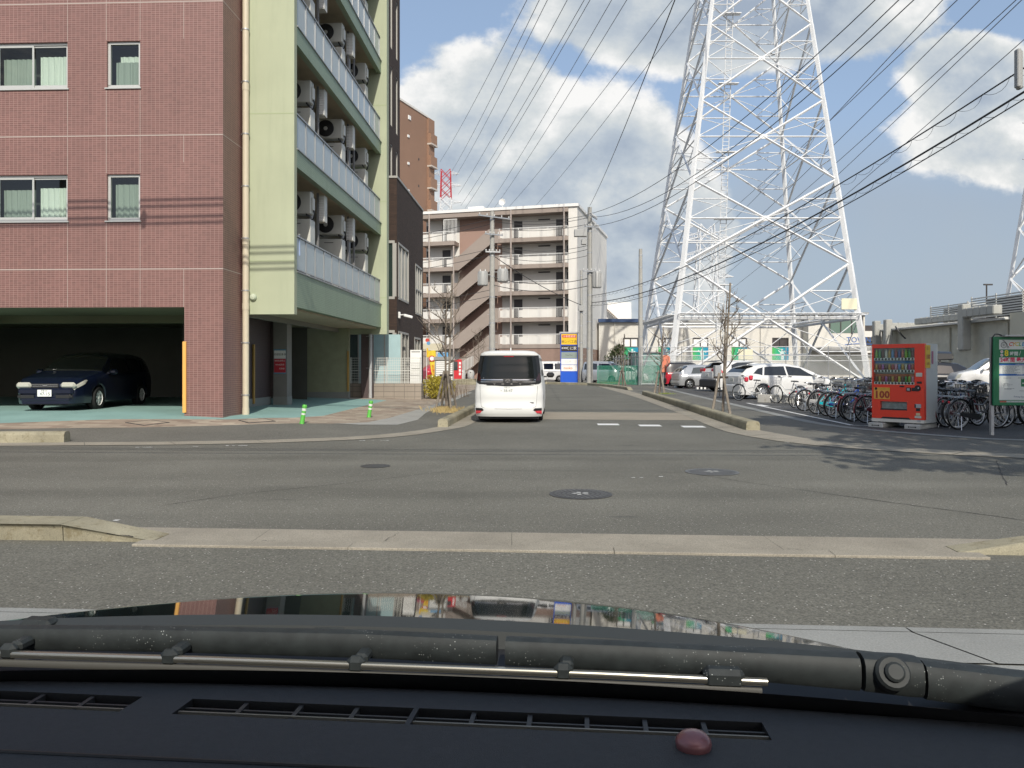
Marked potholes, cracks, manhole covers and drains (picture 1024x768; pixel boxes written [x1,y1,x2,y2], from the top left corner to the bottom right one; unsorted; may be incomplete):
manhole cover [549,489,613,499]
